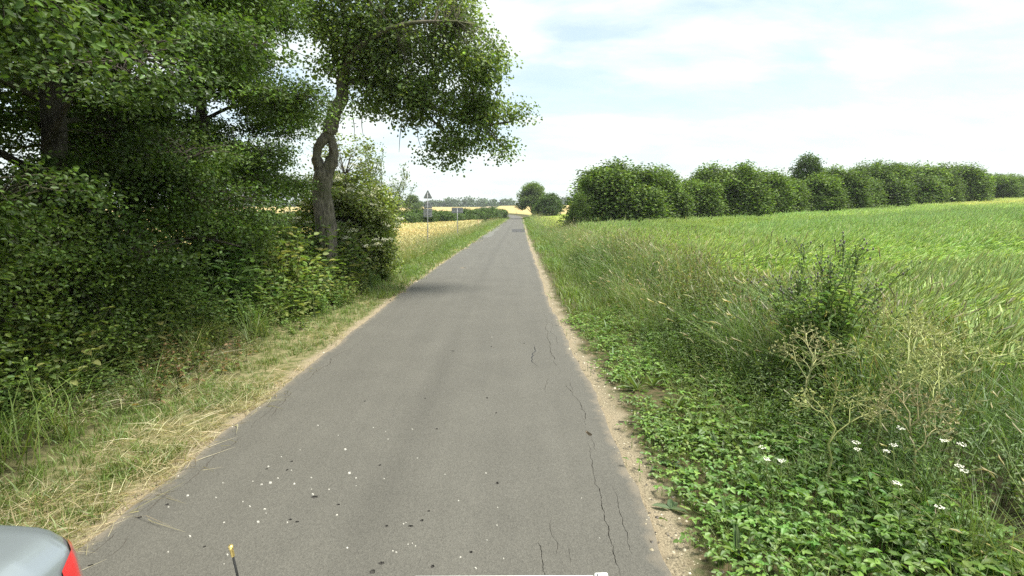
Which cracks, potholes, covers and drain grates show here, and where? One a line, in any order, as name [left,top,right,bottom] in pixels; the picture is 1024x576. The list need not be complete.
crack [566,380,633,573]
